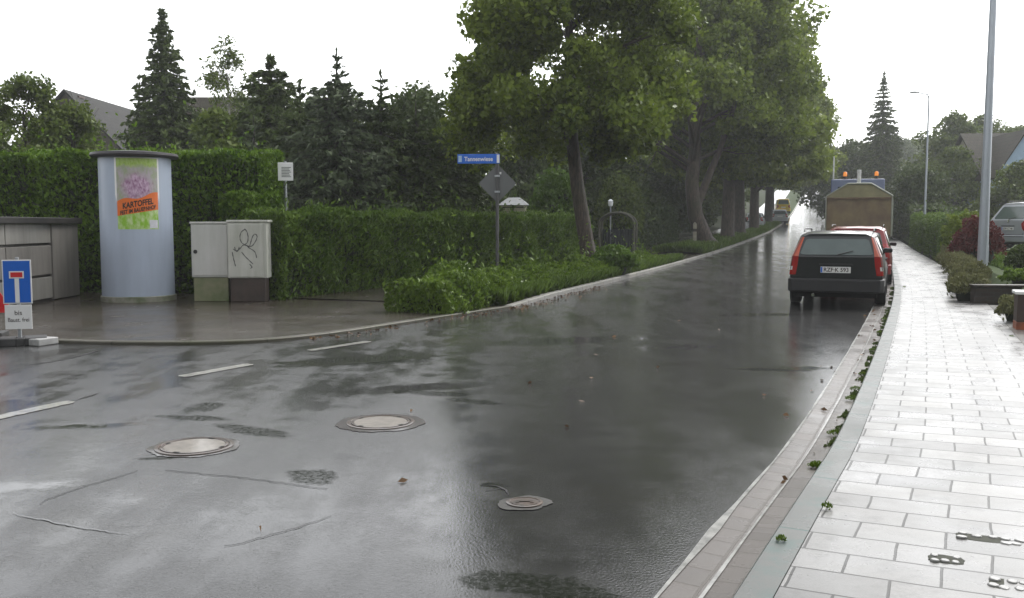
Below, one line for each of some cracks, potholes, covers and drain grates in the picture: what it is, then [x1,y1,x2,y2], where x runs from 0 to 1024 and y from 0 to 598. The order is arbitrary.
manhole cover [335,414,426,432]
manhole cover [146,437,240,457]
crack [165,470,317,488]
utility cover [498,495,553,510]
crack [225,516,330,546]
